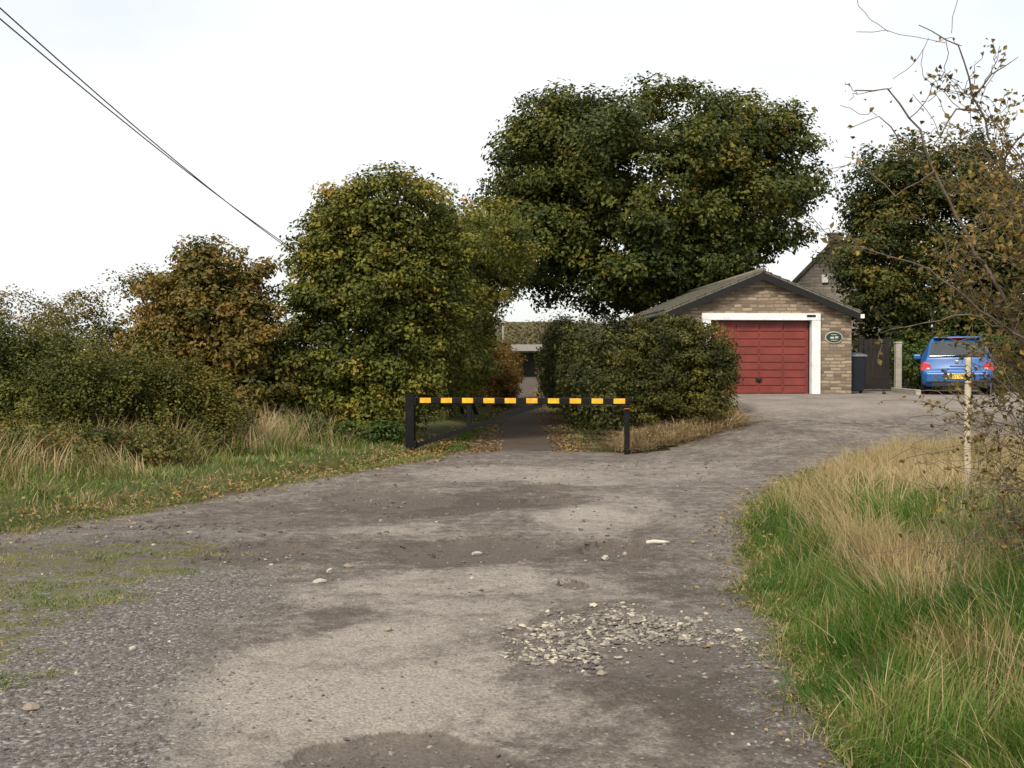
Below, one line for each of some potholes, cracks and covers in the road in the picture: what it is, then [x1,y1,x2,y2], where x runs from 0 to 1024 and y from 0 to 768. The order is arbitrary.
pothole [541,575,605,593]
pothole [481,601,778,683]
